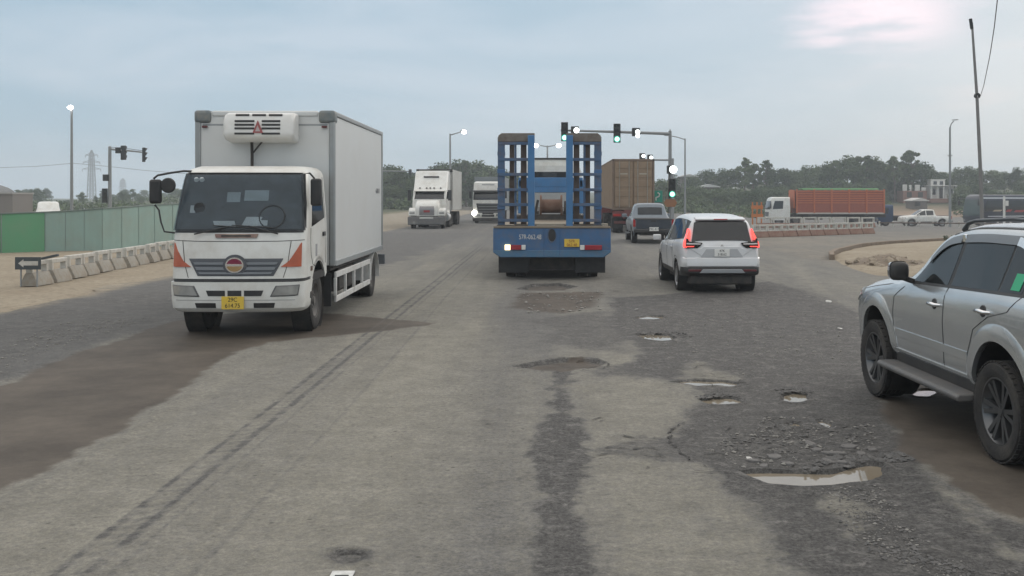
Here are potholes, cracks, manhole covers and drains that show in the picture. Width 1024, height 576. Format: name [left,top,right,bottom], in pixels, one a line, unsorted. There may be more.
pothole [514,283,582,291]
pothole [313,544,382,569]
pothole [506,357,613,373]
crack [592,411,867,475]
pothole [691,394,752,406]
pothole [631,332,681,342]
pothole [729,459,896,490]
pothole [662,378,752,388]
pothole [772,390,819,404]
